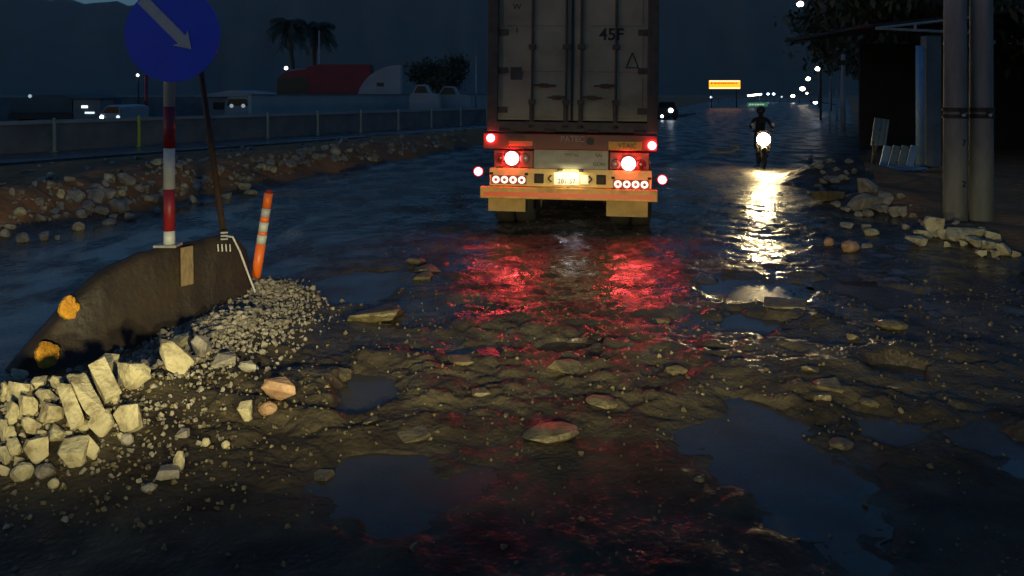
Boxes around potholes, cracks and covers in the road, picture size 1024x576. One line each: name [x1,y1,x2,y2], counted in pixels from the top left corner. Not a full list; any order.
pothole [300,449,501,541]
pothole [924,401,1024,484]
pothole [663,376,921,576]
pothole [321,359,413,424]
pothole [709,306,803,337]
pothole [692,275,819,301]
